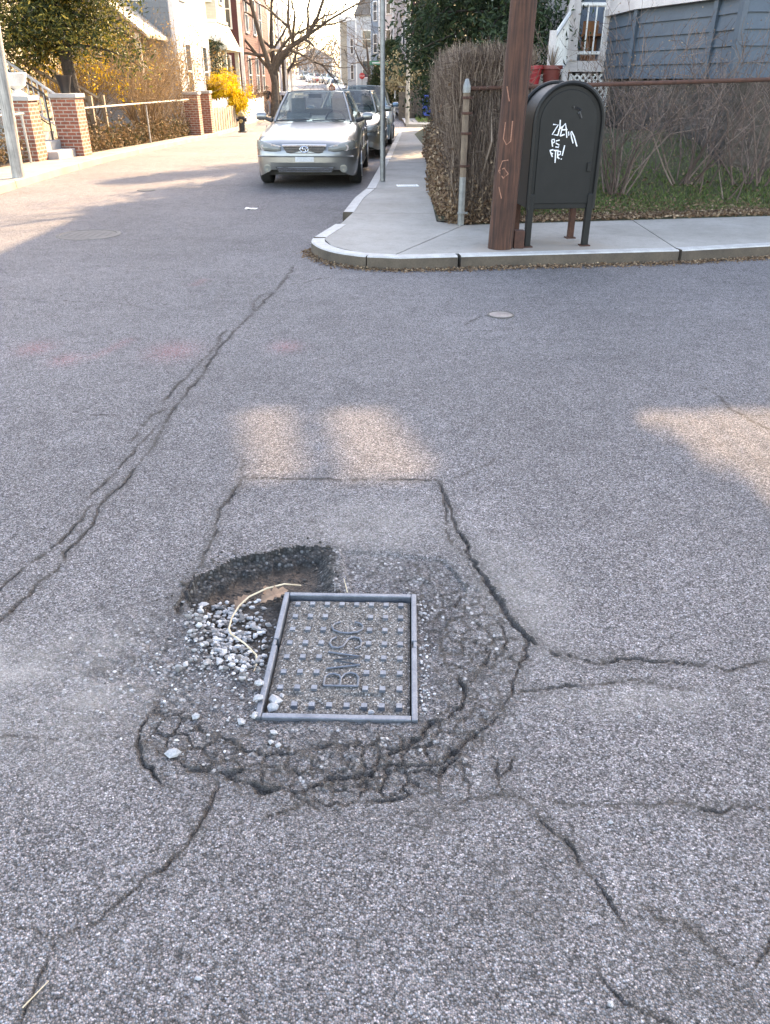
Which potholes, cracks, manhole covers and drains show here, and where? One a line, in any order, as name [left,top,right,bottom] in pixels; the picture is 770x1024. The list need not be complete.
utility cover [487,311,514,319]
manhole cover [255,592,418,723]
crack [0,230,770,1024]
pothole [187,545,336,670]
manhole cover [55,229,121,240]
